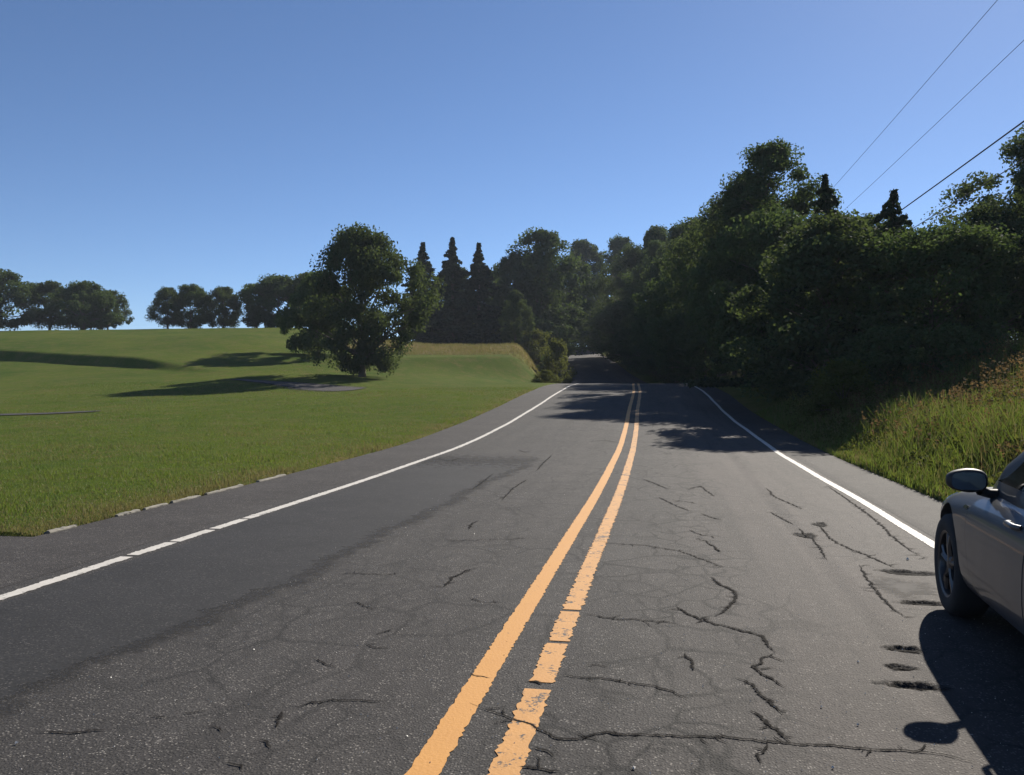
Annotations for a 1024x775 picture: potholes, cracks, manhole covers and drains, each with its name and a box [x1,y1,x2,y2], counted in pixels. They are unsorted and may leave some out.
pothole [872,681,951,691]
pothole [883,663,918,671]
crack [260,712,283,747]
crack [476,451,551,498]
pothole [884,645,922,653]
crack [479,479,973,772]
